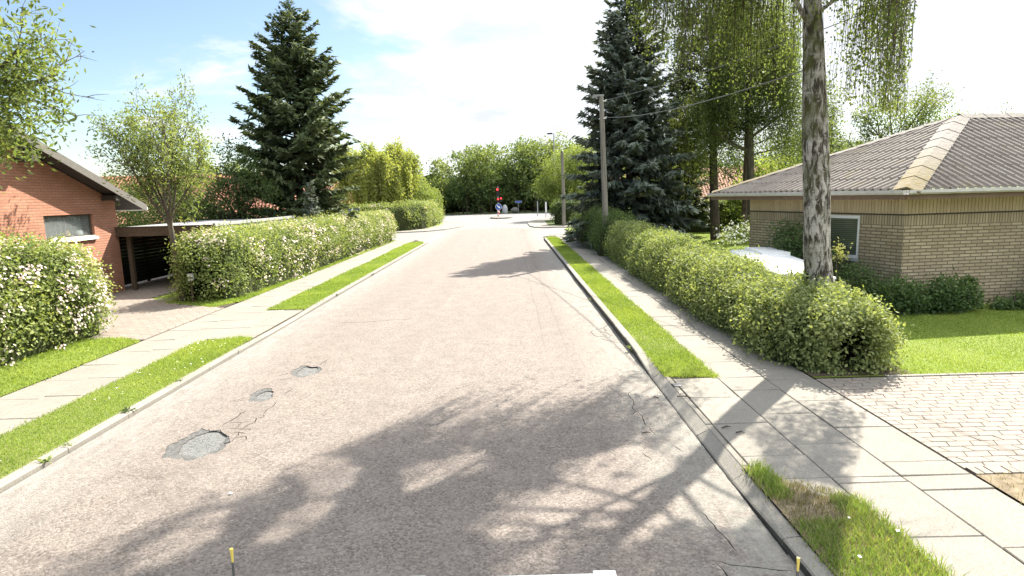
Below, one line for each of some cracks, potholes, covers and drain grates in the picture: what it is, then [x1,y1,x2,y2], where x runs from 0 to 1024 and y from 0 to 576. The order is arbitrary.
crack [703,513,790,576]
crack [224,373,292,444]
pothole [162,428,230,461]
pothole [290,366,322,377]
pothole [249,388,274,402]
